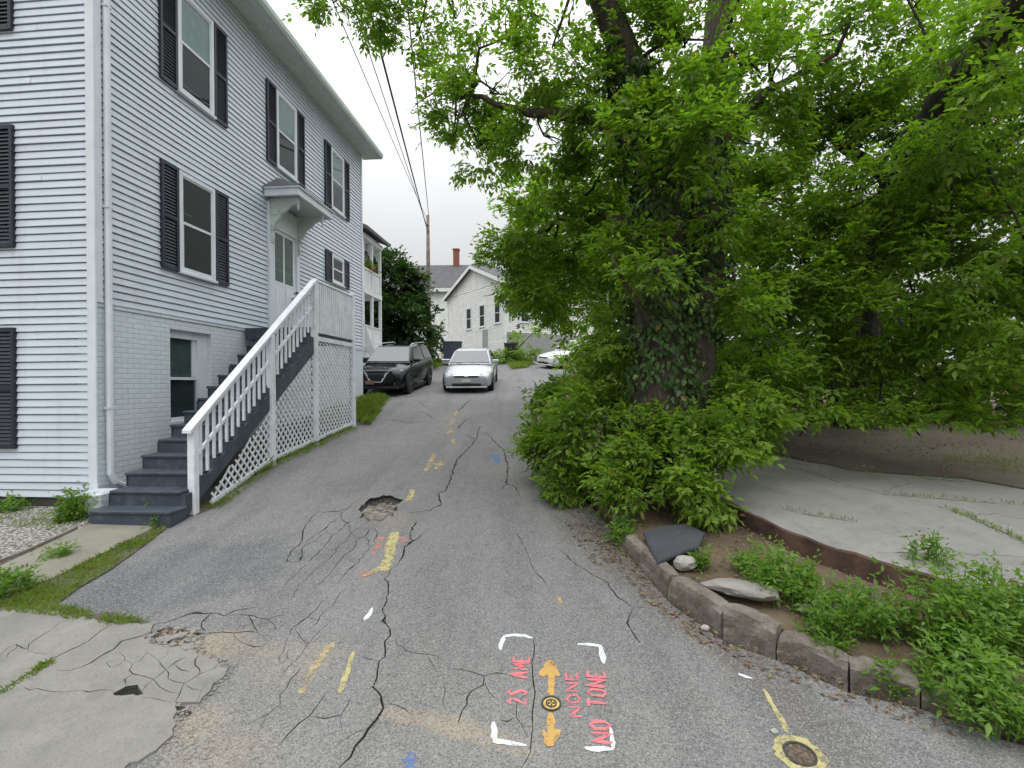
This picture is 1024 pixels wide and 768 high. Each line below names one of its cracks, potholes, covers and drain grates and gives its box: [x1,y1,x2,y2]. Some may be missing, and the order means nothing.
pothole [358,495,403,522]
pothole [113,685,143,696]
pothole [154,626,201,647]
crack [561,551,650,644]
crack [246,400,536,768]
crack [0,618,219,702]
manhole cover [783,741,818,767]
